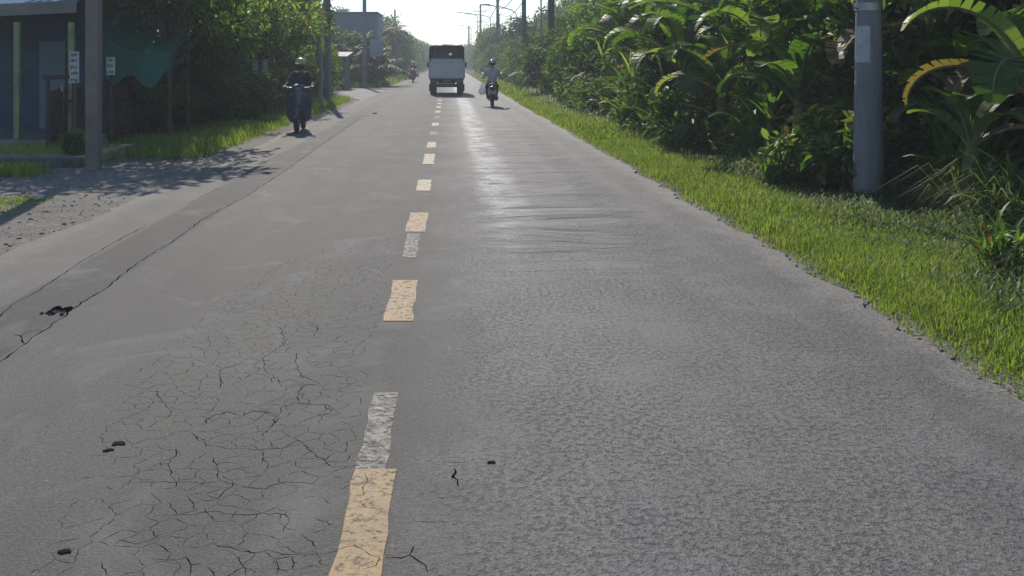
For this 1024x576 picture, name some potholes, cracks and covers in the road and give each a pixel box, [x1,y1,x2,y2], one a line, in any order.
pothole [40,306,73,316]
crack [0,126,348,362]
crack [389,547,428,572]
crack [450,462,468,486]
crack [33,238,388,576]
